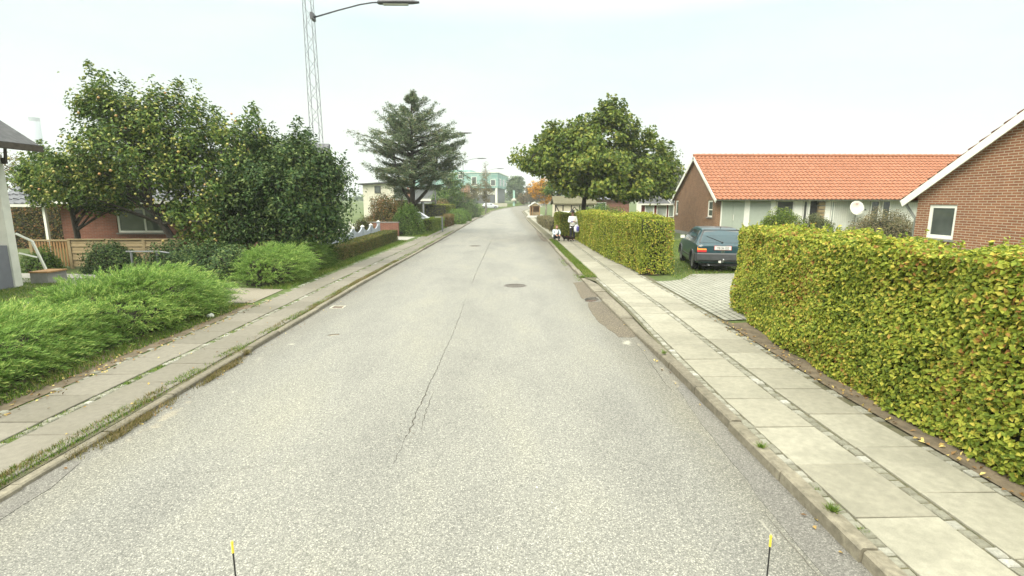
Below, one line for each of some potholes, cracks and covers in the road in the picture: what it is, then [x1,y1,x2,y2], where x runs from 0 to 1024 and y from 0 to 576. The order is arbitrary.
crack [389,244,490,464]
